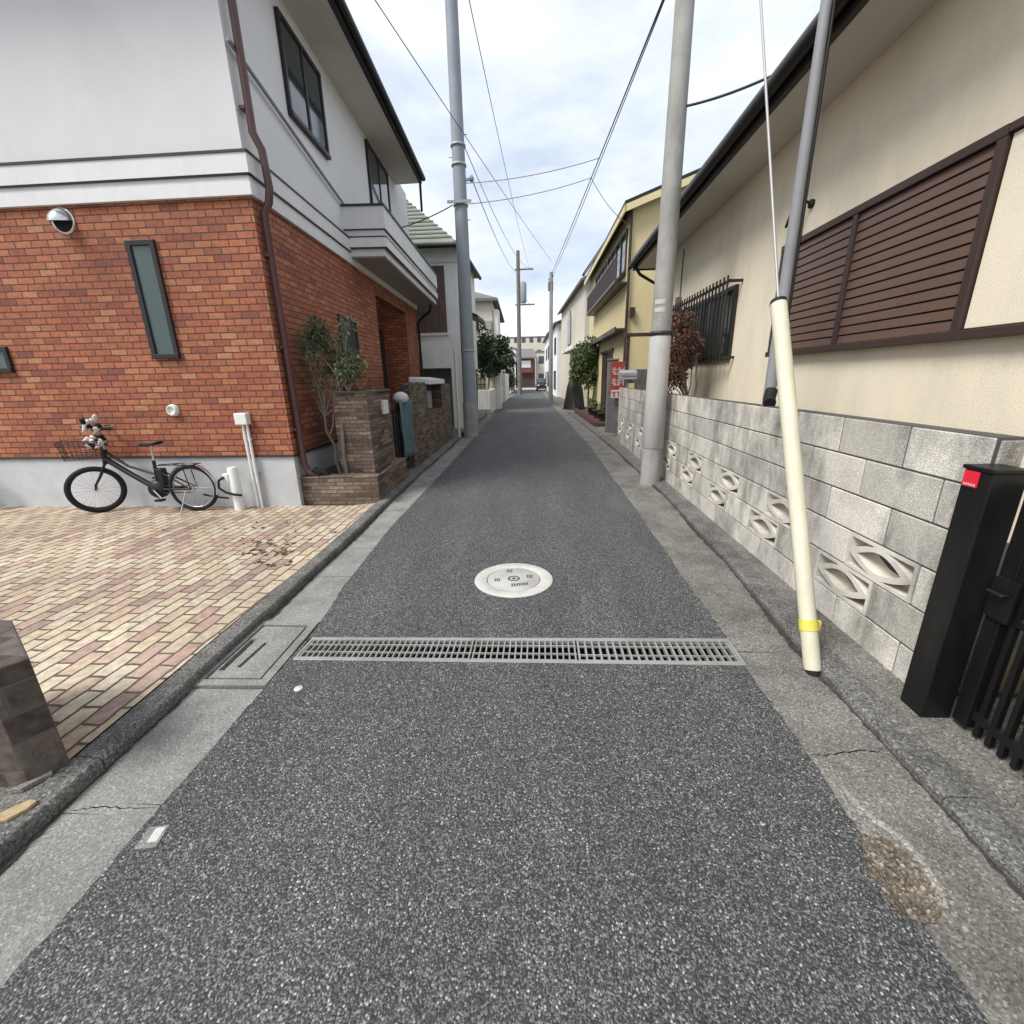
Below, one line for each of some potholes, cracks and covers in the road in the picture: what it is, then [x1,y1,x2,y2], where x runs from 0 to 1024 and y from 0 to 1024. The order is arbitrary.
drain grate [293,637,747,666]
pothole [833,776,969,933]
crack [73,806,139,814]
manhole cover [475,563,553,598]
